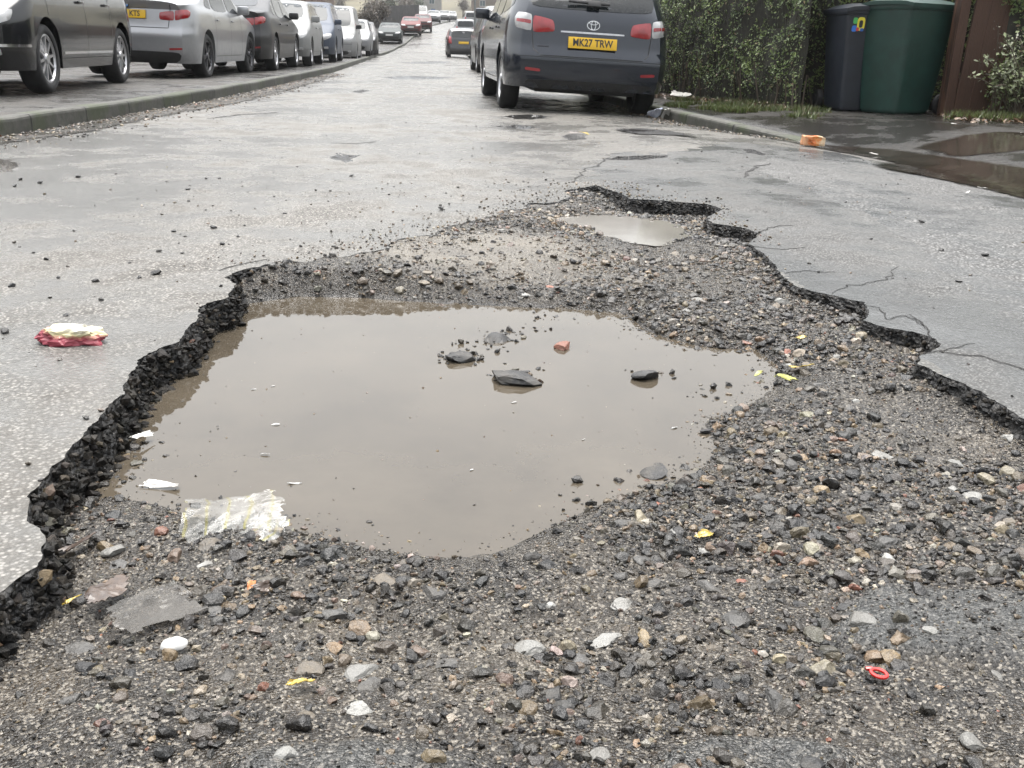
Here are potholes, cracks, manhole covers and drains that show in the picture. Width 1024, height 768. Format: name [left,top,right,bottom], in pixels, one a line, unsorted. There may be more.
crack [871,306,1024,369]
crack [742,225,805,249]
pothole [0,159,20,172]
pothole [562,133,588,141]
pothole [0,185,1024,768]
pothole [330,153,362,163]
